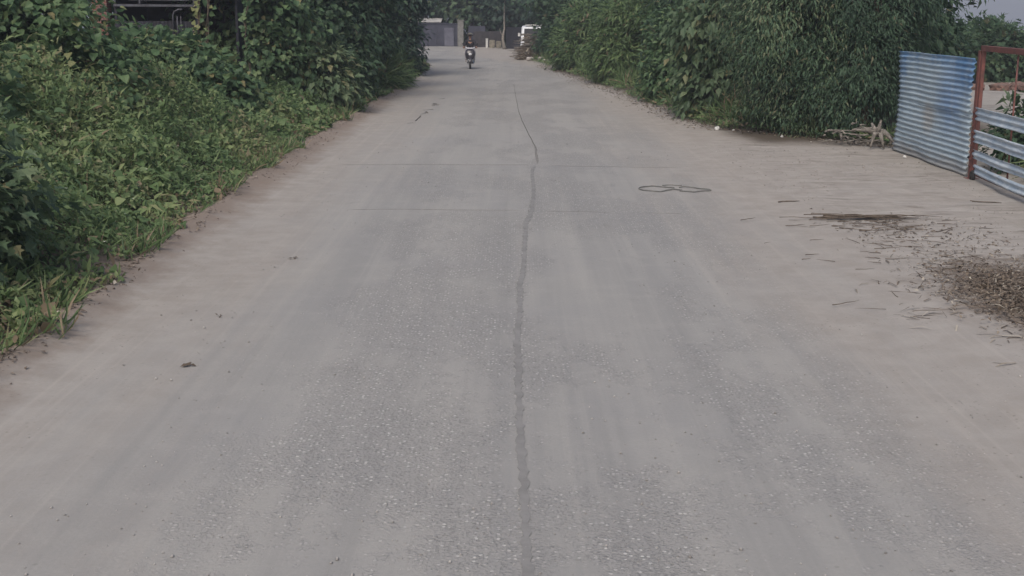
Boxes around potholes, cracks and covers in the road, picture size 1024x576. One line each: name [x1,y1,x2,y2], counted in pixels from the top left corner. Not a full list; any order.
crack [514,88,539,164]
